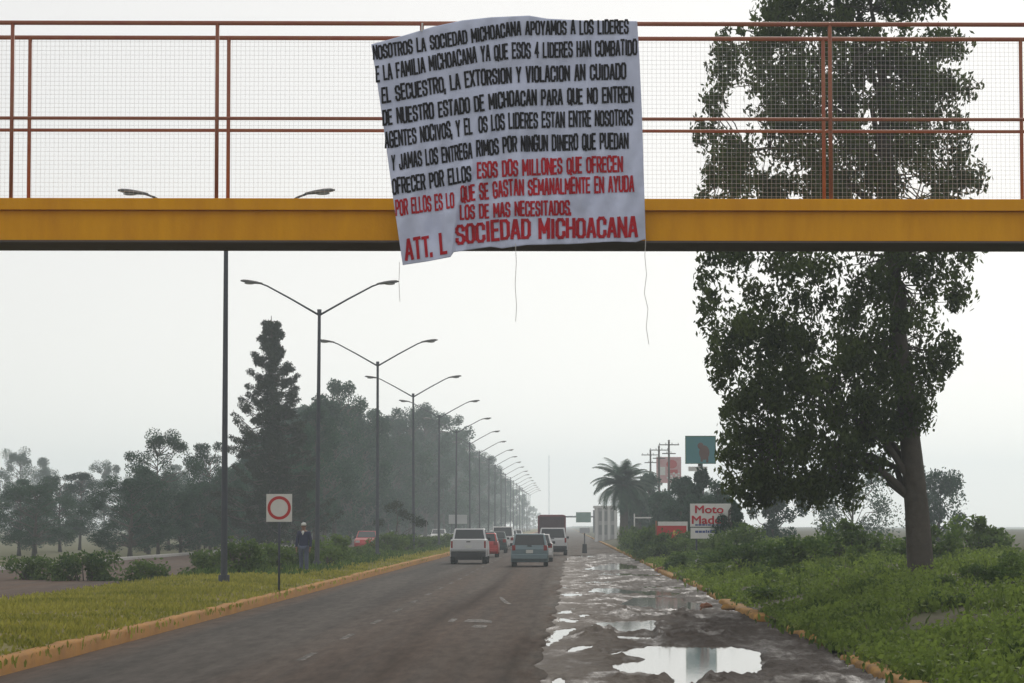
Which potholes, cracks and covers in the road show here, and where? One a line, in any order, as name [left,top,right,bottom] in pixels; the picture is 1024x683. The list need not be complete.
pothole [605,641,766,683]
pothole [590,617,660,632]
pothole [545,626,580,646]
pothole [579,561,643,572]
pothole [565,643,597,652]
pothole [614,595,715,610]
